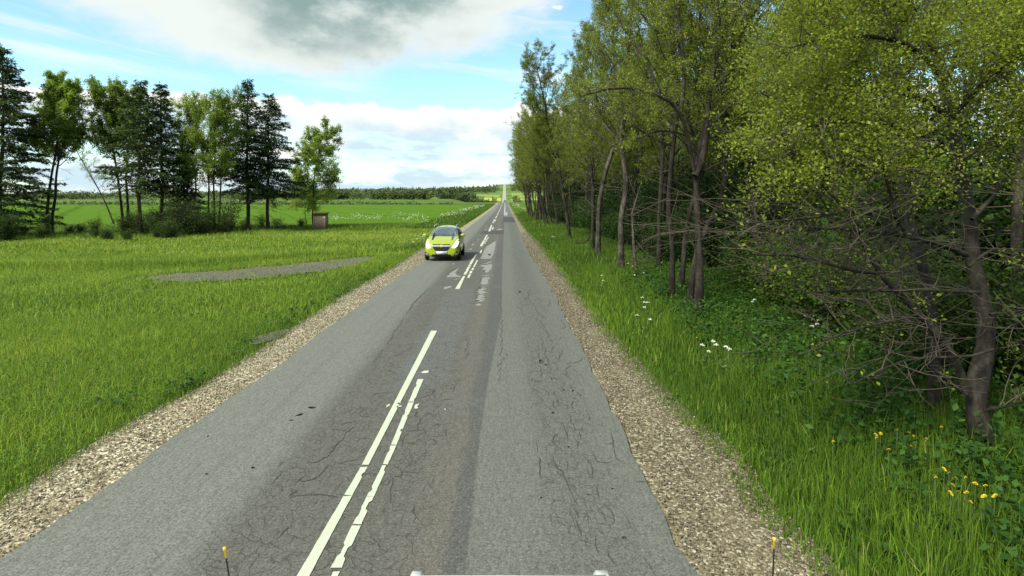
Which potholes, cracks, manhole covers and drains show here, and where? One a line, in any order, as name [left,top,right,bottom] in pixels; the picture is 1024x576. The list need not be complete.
crack [516,290,666,571]
crack [271,392,425,523]
